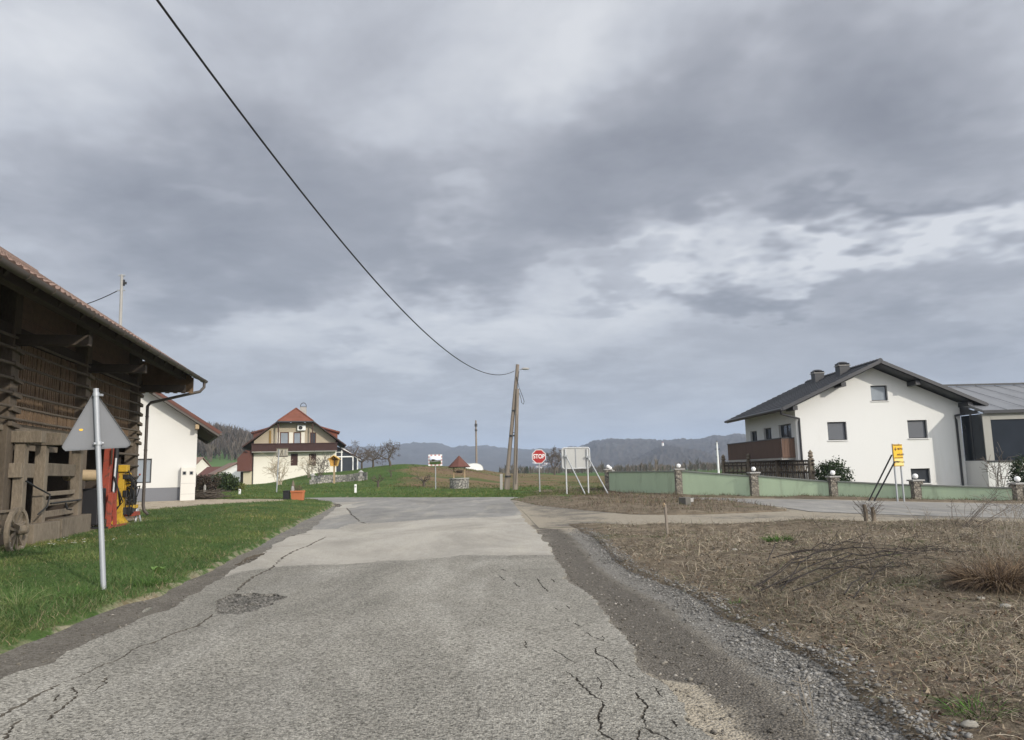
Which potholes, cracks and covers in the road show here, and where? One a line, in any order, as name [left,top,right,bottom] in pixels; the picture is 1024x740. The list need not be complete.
pothole [215,593,287,614]
crack [0,614,213,740]
crack [235,534,326,592]
crack [537,564,677,740]
